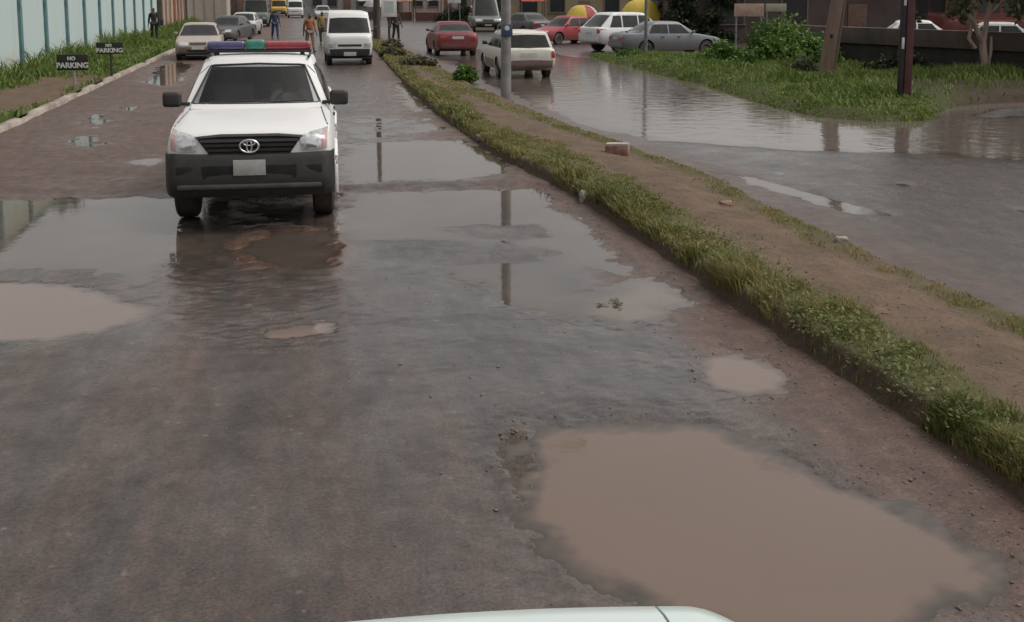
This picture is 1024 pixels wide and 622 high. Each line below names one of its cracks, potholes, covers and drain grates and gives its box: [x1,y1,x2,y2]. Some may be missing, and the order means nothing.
pothole [243,315,361,343]
pothole [0,278,169,348]
pothole [492,416,1024,622]
pothole [218,225,361,274]
pothole [677,348,813,403]
